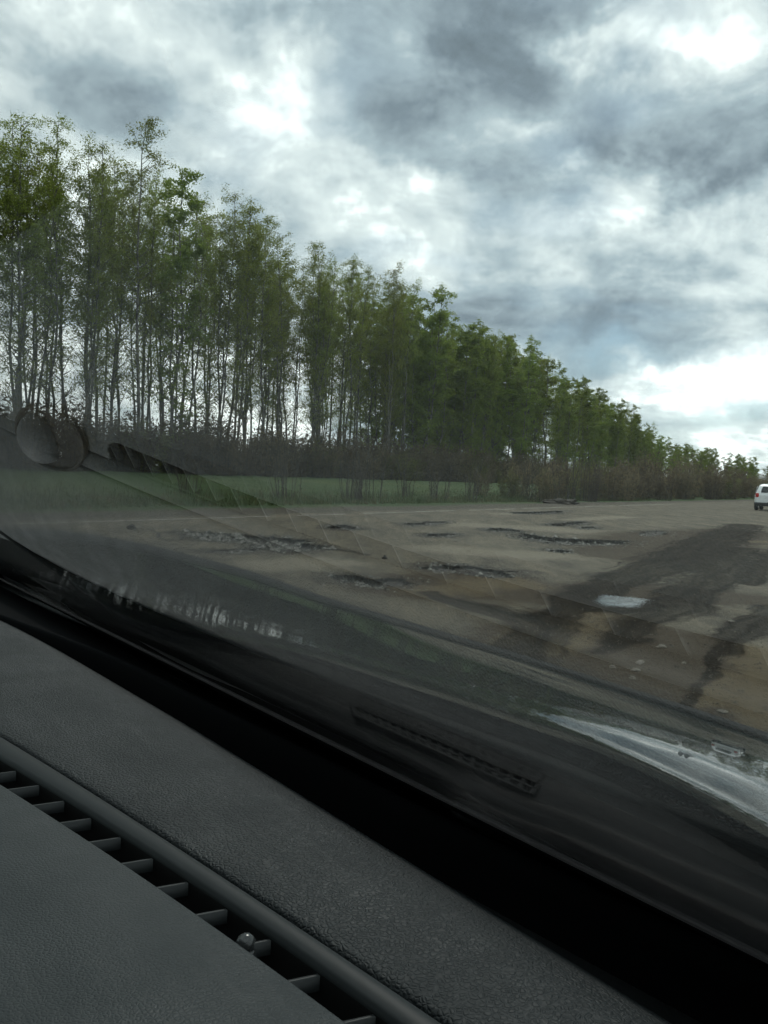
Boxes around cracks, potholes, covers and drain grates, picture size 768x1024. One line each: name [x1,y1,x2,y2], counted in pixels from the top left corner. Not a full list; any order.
pothole [222,533,355,558]
pothole [312,571,435,592]
pothole [498,531,662,548]
pothole [388,561,545,581]
pothole [208,530,267,542]
pothole [316,523,380,532]
pothole [536,547,587,555]
